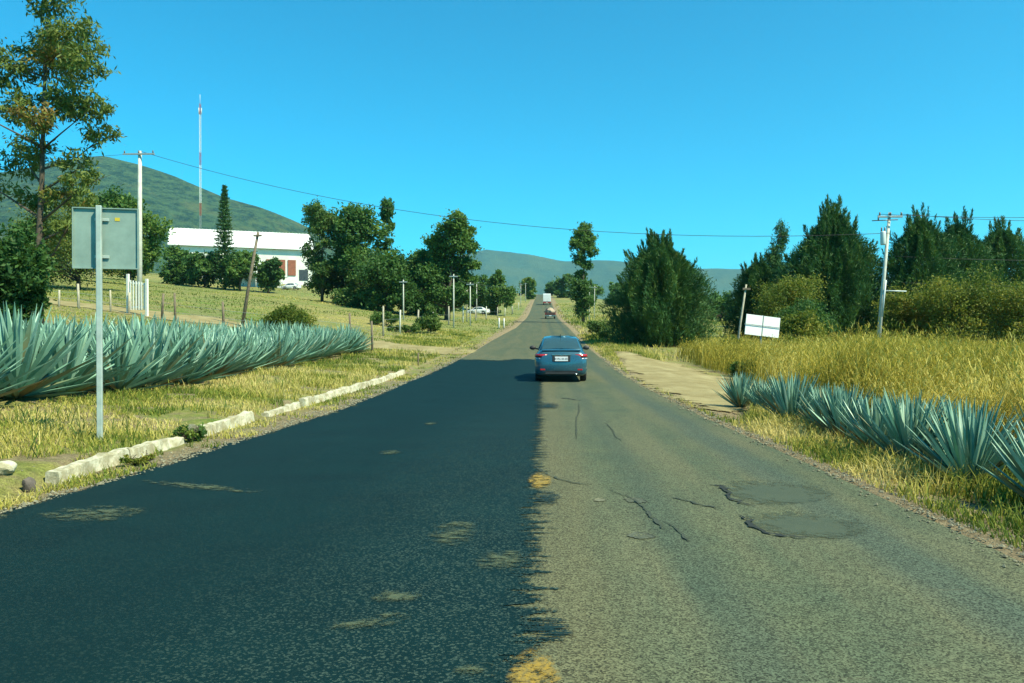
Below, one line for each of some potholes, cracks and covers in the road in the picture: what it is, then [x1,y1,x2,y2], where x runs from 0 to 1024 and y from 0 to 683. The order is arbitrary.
crack [610,484,812,541]
pothole [745,511,867,540]
pothole [724,480,833,505]
